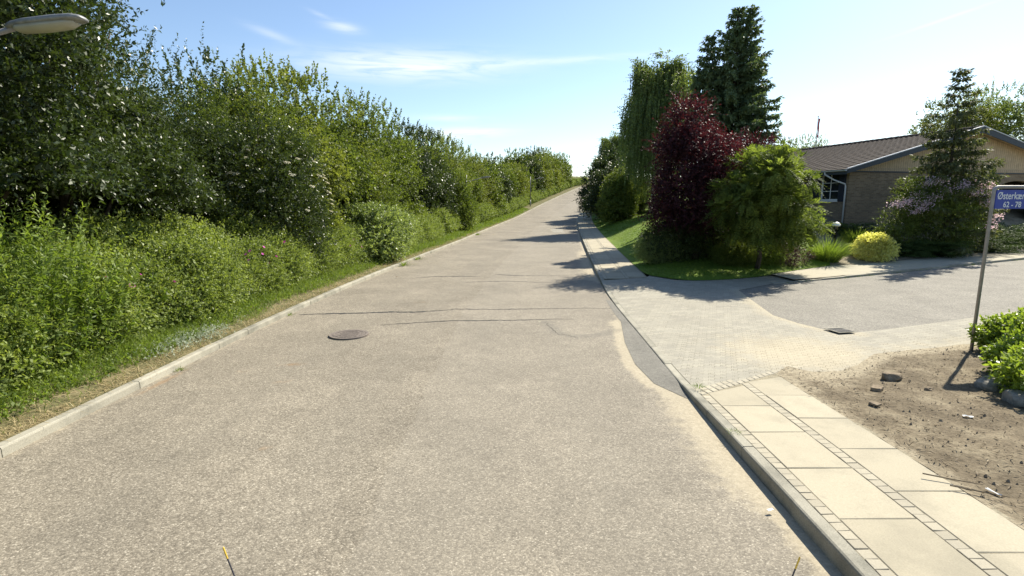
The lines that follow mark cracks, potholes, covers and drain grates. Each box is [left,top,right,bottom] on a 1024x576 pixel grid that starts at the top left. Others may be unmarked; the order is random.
manhole cover [329,329,369,340]
